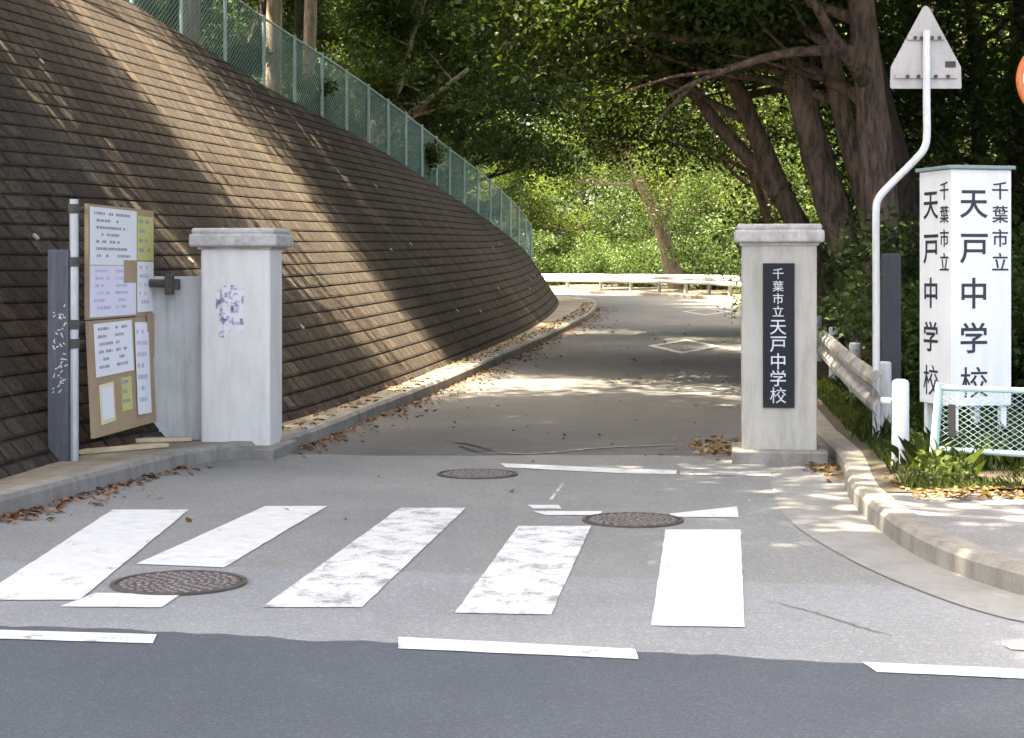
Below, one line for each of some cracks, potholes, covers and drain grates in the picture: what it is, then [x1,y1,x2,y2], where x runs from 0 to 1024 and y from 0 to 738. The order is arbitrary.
manhole cover [110,570,247,596]
manhole cover [582,512,684,528]
crack [452,441,682,454]
manhole cover [437,469,518,479]
crack [766,600,893,636]
